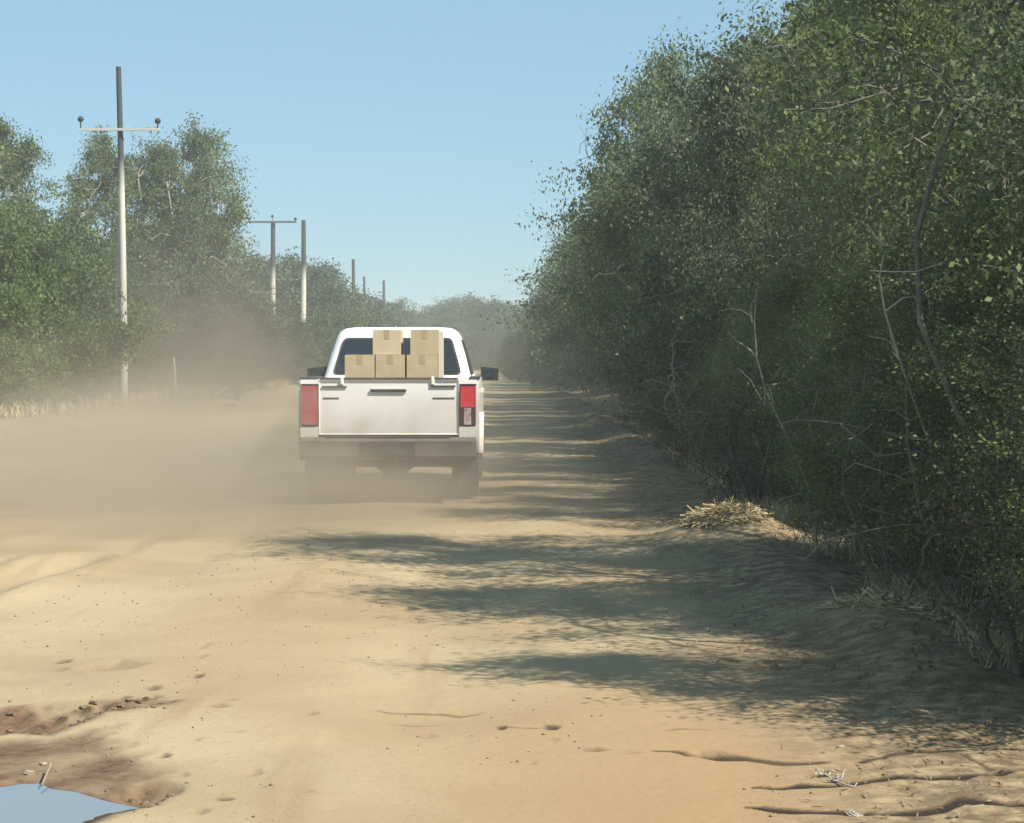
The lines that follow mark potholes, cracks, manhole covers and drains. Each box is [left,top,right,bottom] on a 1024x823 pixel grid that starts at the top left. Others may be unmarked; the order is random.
pothole [118,781,186,808]
crack [375,710,487,727]
crack [652,724,1024,817]
pothole [0,696,182,737]
